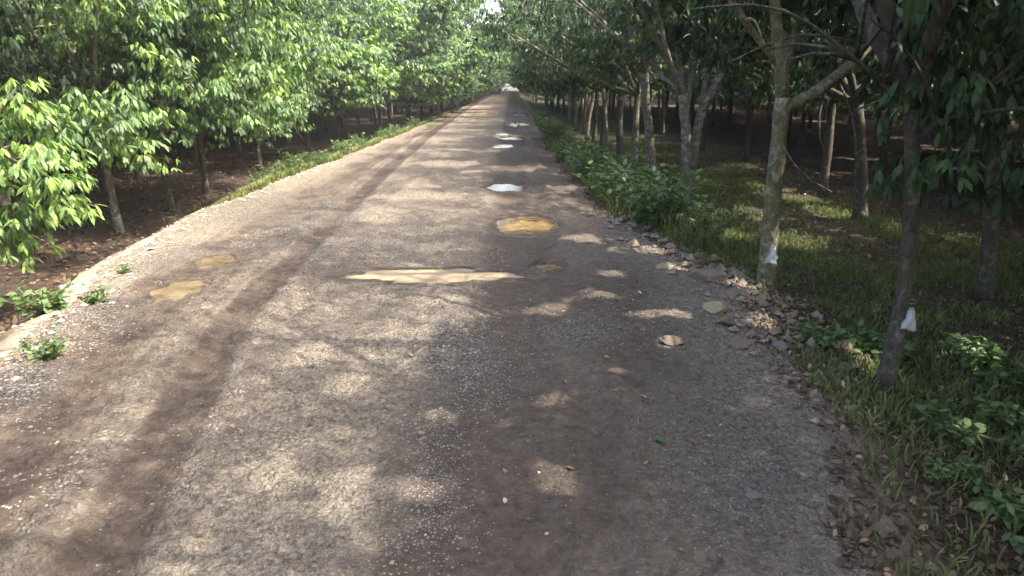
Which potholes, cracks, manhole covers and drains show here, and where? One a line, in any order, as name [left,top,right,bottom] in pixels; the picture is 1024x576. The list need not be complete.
pothole [480,182,532,192]
